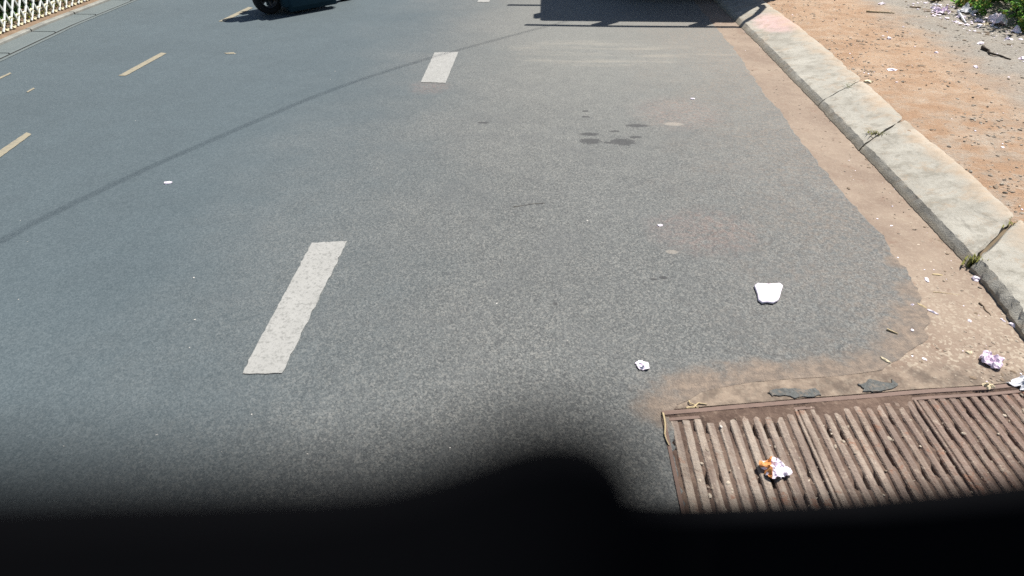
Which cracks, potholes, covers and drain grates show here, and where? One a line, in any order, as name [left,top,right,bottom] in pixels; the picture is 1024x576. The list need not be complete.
drain grate [661,383,1024,501]
